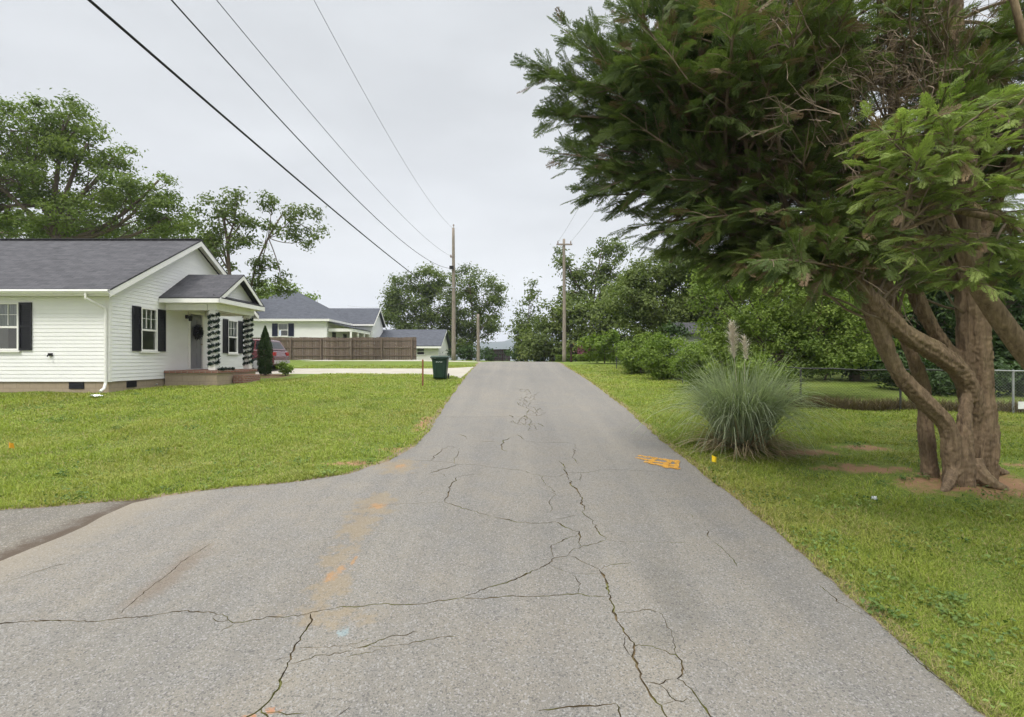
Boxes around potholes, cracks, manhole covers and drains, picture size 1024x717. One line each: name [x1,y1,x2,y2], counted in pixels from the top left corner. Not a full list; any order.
crack [488,389,568,451]
crack [0,443,711,717]
